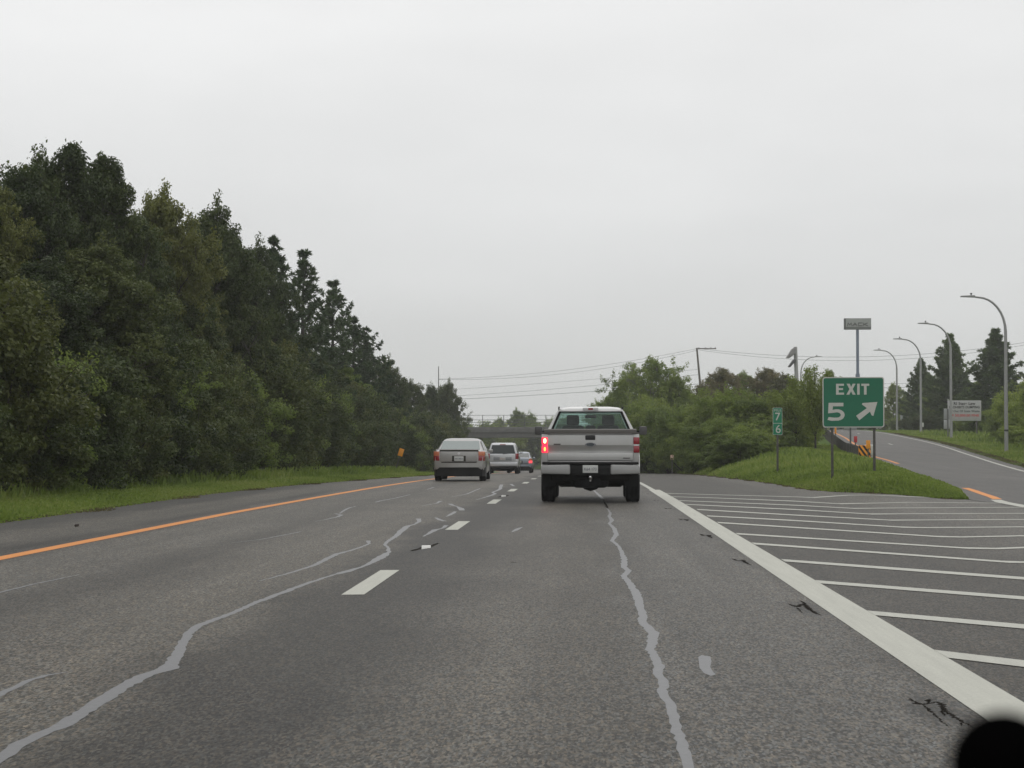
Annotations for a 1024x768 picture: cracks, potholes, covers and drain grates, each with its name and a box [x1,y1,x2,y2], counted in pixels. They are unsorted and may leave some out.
crack [788,600,820,615]
crack [908,698,968,727]
